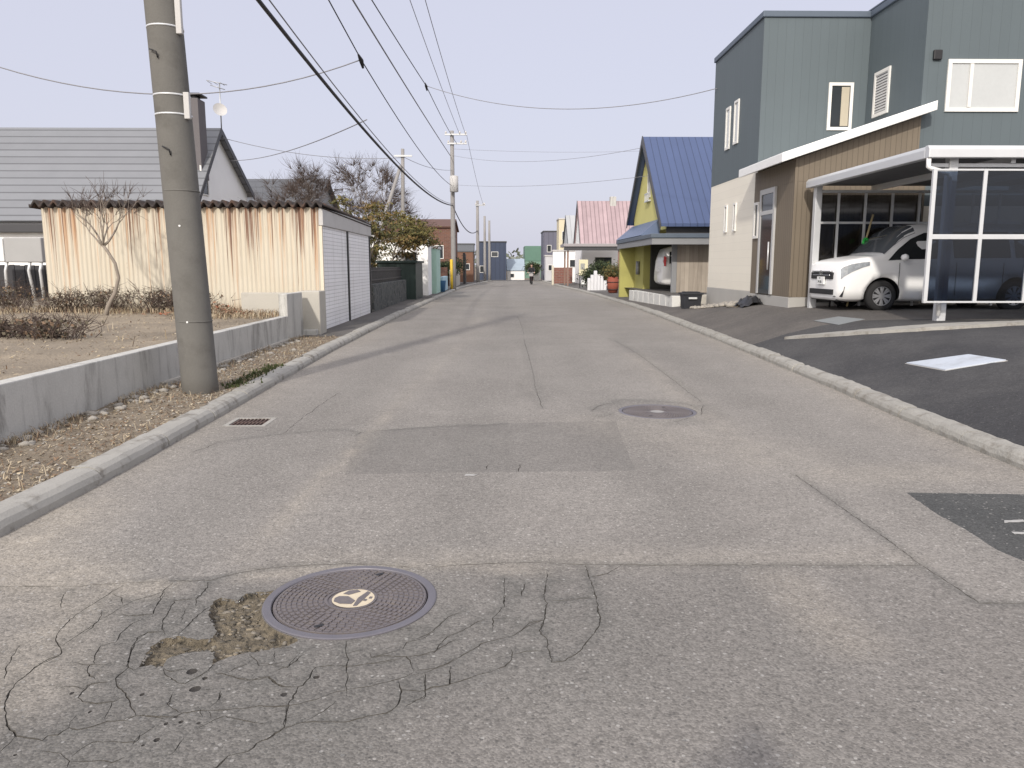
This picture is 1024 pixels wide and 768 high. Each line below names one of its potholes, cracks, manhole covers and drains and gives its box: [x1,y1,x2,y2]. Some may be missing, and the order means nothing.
crack [1,566,601,768]
drain grate [223,417,278,439]
pothole [139,591,298,668]
manhole cover [618,404,697,421]
manhole cover [262,566,437,657]
